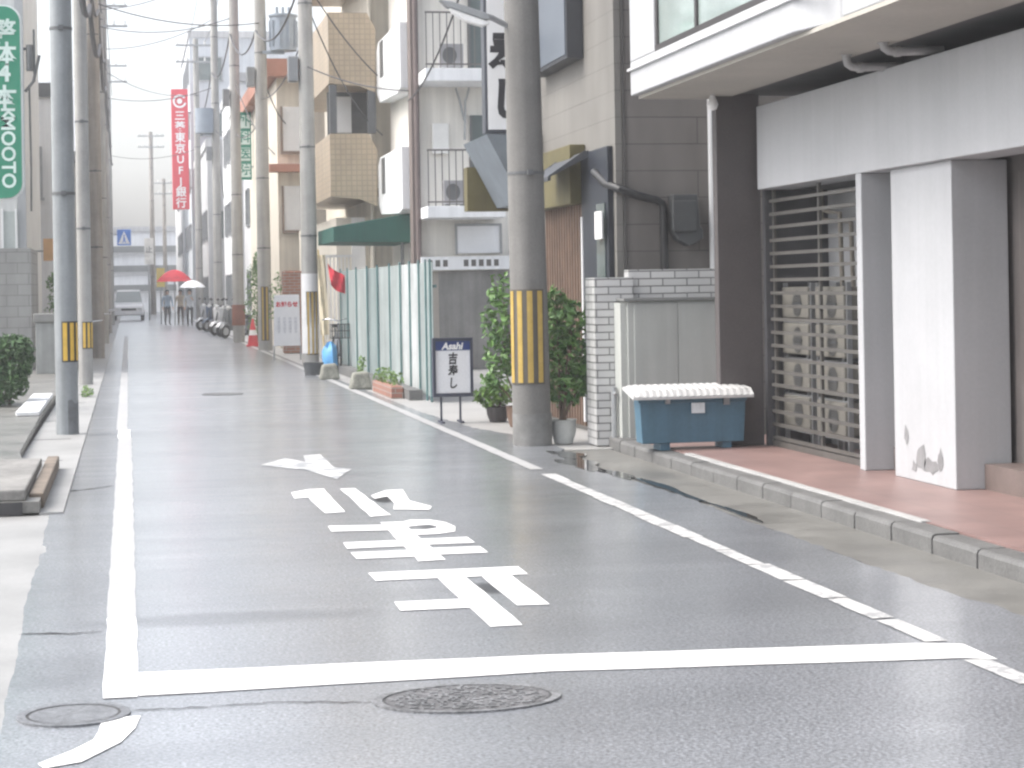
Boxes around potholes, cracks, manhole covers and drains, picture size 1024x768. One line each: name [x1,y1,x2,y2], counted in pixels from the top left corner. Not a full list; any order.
manhole cover [373,683,561,714]
manhole cover [16,702,131,728]
crack [138,701,358,710]
